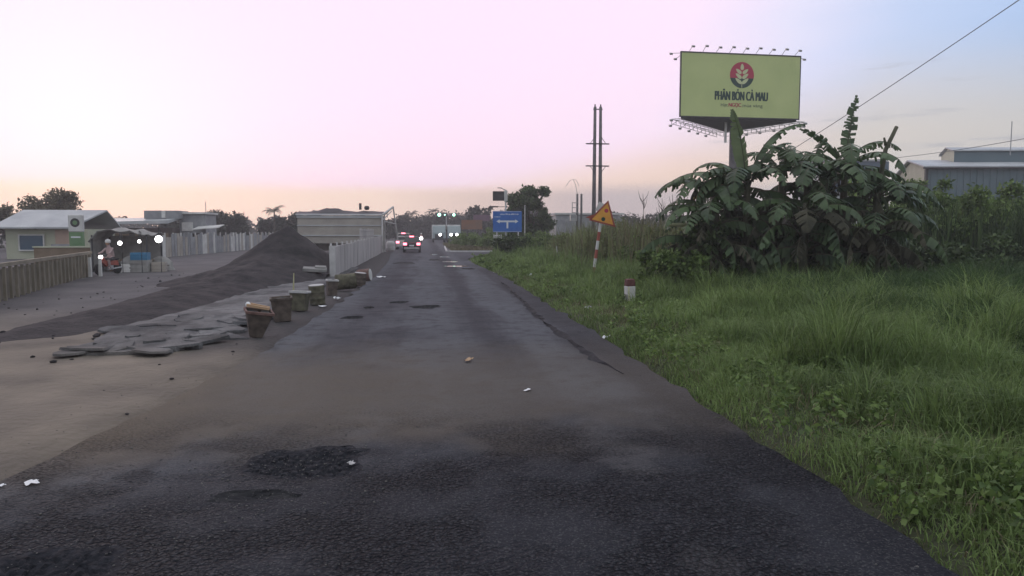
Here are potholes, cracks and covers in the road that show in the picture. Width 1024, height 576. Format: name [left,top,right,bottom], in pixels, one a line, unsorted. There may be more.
pothole [206,489,303,503]
crack [500,282,624,374]
